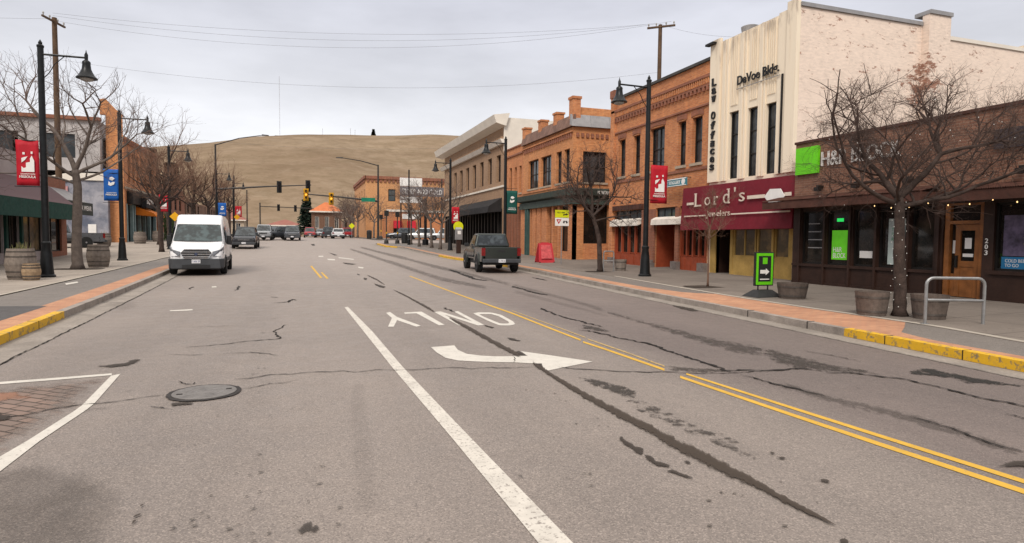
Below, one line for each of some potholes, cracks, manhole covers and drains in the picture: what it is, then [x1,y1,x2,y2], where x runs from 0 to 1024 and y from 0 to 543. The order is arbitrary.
crack [239,357,518,389]
crack [541,308,1024,418]
manhole cover [165,384,241,401]
crack [181,297,295,355]
